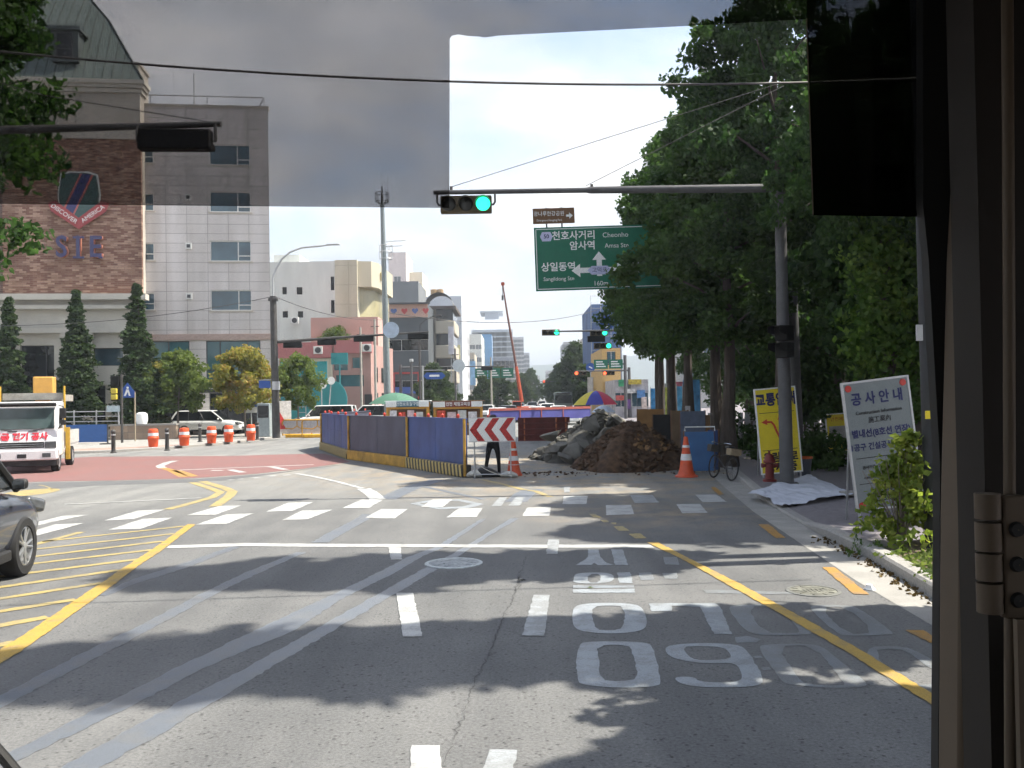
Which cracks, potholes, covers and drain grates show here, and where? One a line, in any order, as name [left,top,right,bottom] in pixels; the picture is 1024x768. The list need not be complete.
manhole cover [425,557,483,569]
crack [442,557,526,766]
manhole cover [785,585,842,597]
